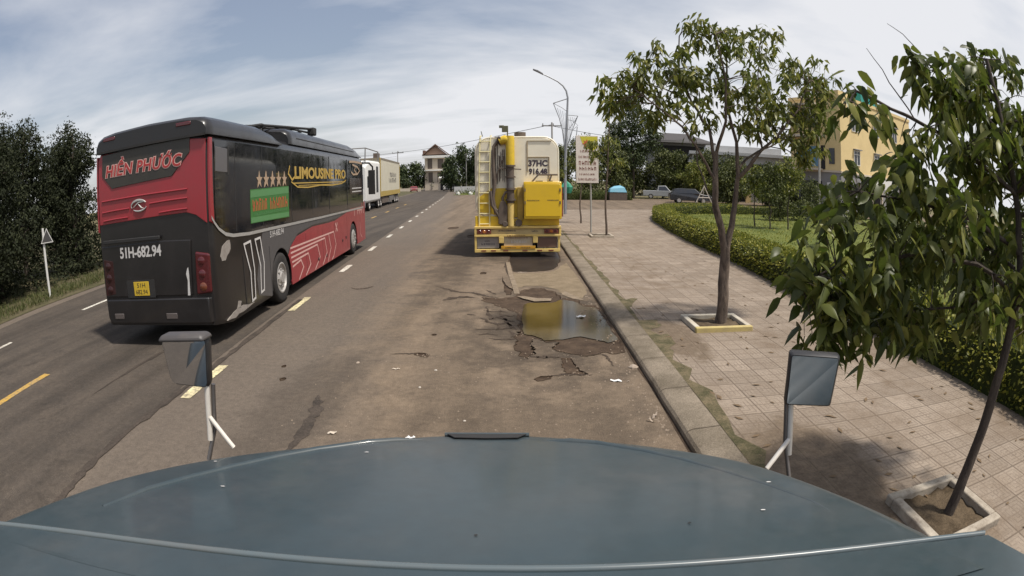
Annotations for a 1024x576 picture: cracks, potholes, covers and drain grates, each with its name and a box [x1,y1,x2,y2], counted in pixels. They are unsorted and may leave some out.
crack [531,354,614,376]
pothole [481,288,625,358]
